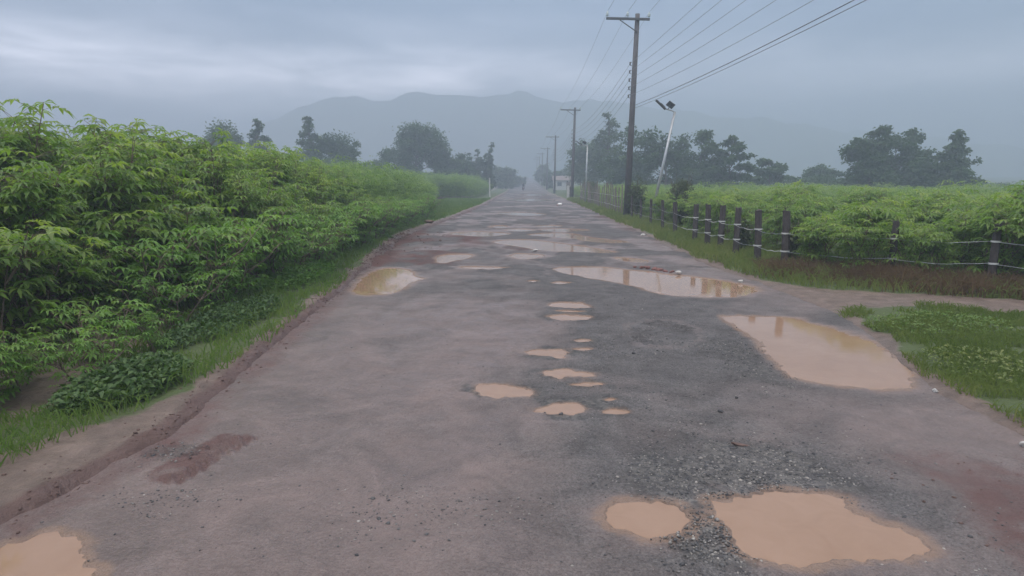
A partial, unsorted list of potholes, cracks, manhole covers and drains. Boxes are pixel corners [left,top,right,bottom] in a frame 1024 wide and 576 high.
pothole [0,529,100,576]
pothole [709,489,933,569]
pothole [435,253,473,263]
pothole [350,268,424,295]
pothole [542,368,596,379]
pothole [553,266,759,298]
pothole [720,315,917,390]
pothole [474,383,535,399]
pothole [533,402,587,415]
pothole [603,499,693,539]
pothole [524,349,570,359]
